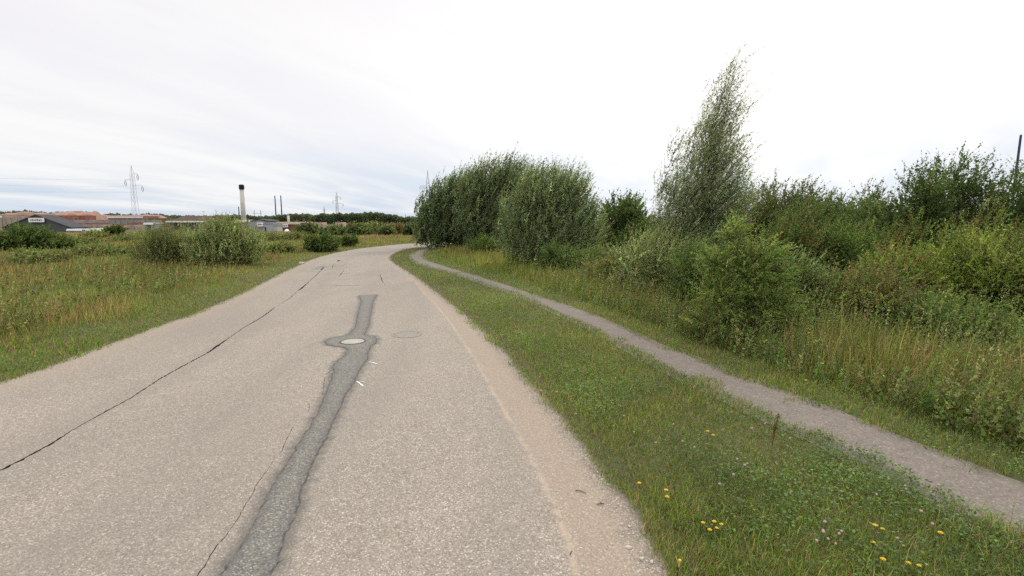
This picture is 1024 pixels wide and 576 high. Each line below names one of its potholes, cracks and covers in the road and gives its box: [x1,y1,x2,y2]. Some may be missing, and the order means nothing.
crack [197,369,334,576]
